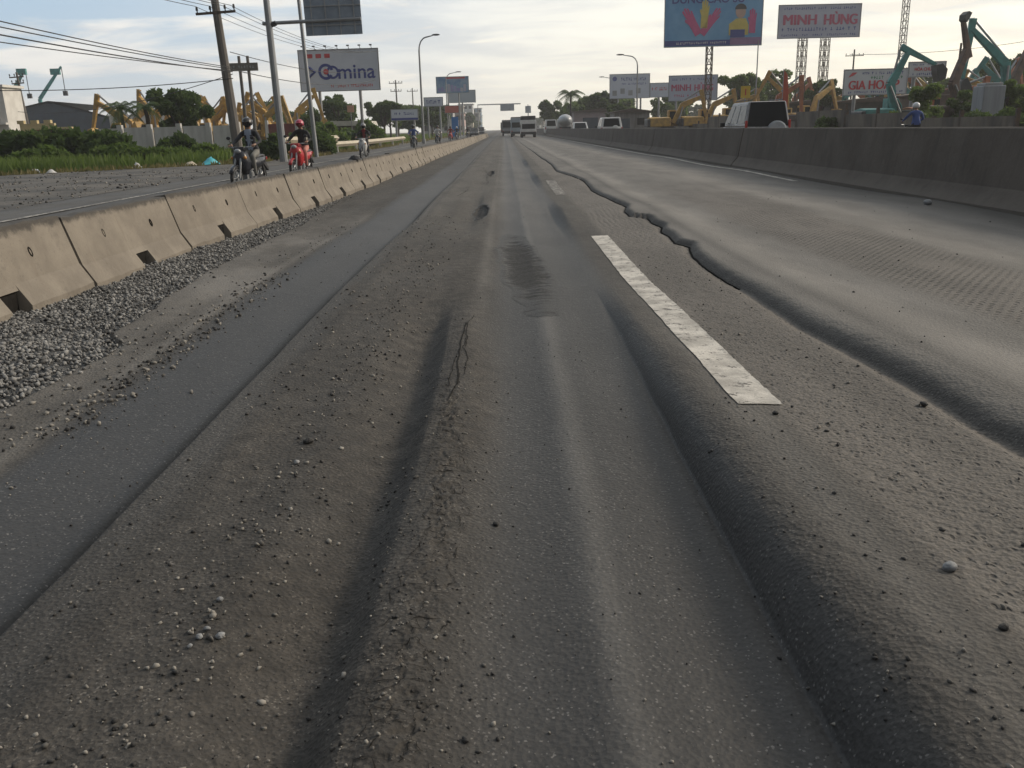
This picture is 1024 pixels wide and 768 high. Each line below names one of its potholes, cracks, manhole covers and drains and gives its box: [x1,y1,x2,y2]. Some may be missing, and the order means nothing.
pothole [471,203,491,221]
crack [536,154,740,290]
crack [348,316,474,768]
